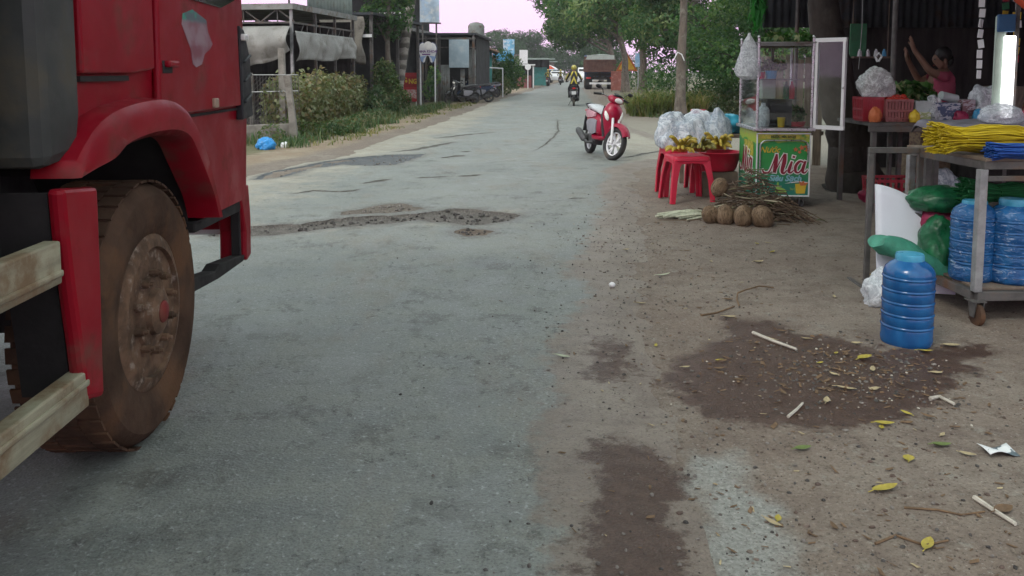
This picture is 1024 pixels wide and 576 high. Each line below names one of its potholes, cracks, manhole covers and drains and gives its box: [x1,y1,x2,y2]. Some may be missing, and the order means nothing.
pothole [340,203,424,215]
pothole [208,208,520,237]
crack [293,179,390,194]
crack [397,132,493,158]
